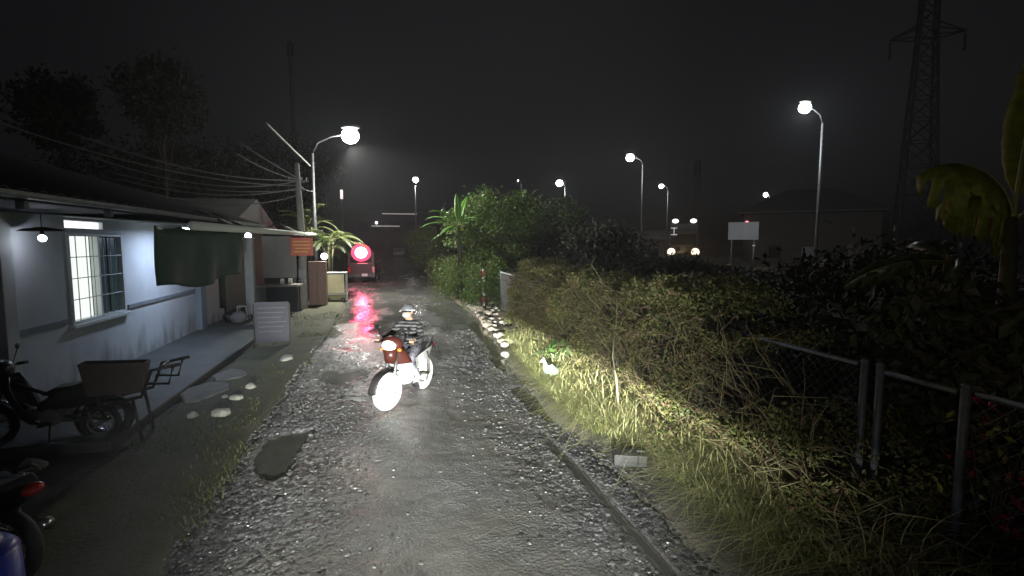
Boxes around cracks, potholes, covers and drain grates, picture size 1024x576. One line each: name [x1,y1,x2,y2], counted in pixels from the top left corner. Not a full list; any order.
pothole [315,370,369,385]
